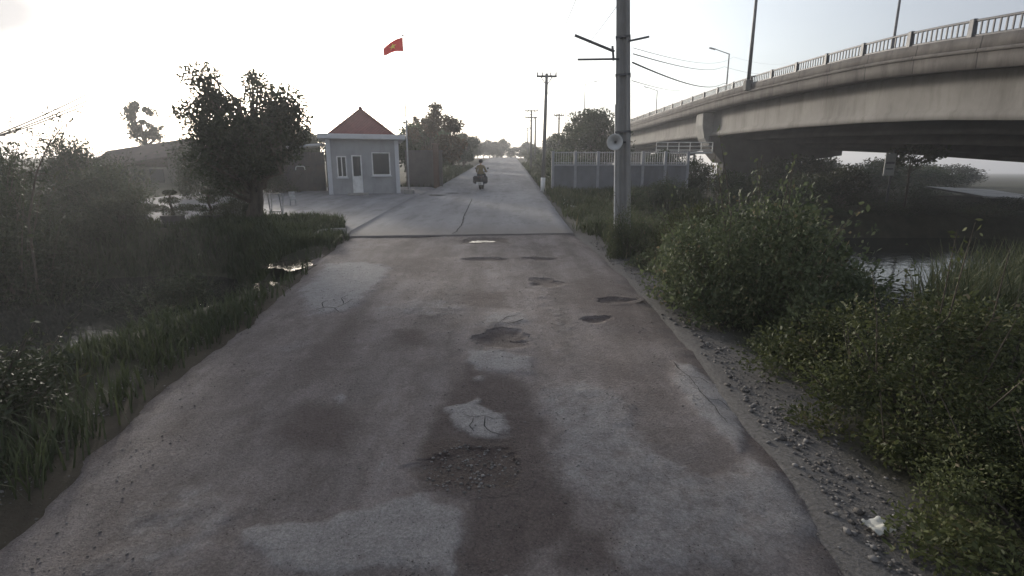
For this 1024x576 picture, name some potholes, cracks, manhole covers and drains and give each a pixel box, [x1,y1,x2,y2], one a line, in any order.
pothole [383,437,540,501]
pothole [589,294,645,306]
pothole [460,323,541,353]
pothole [570,313,622,327]
pothole [521,276,573,290]
crack [674,362,728,423]
